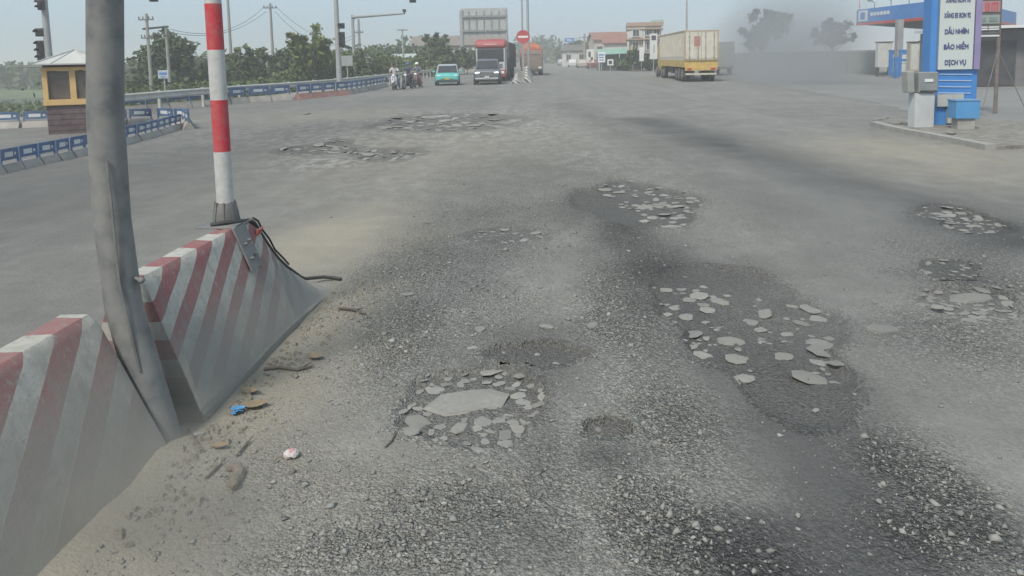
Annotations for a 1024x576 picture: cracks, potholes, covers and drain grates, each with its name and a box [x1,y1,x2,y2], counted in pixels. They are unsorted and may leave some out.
pothole [902,256,996,281]
pothole [560,178,716,231]
pothole [642,262,871,438]
pothole [344,147,432,163]
pothole [473,338,602,370]
pothole [905,282,1024,328]
pothole [268,138,367,157]
pothole [570,412,647,442]
pothole [360,113,539,133]
pothole [900,203,1023,238]
pothole [384,363,560,460]
